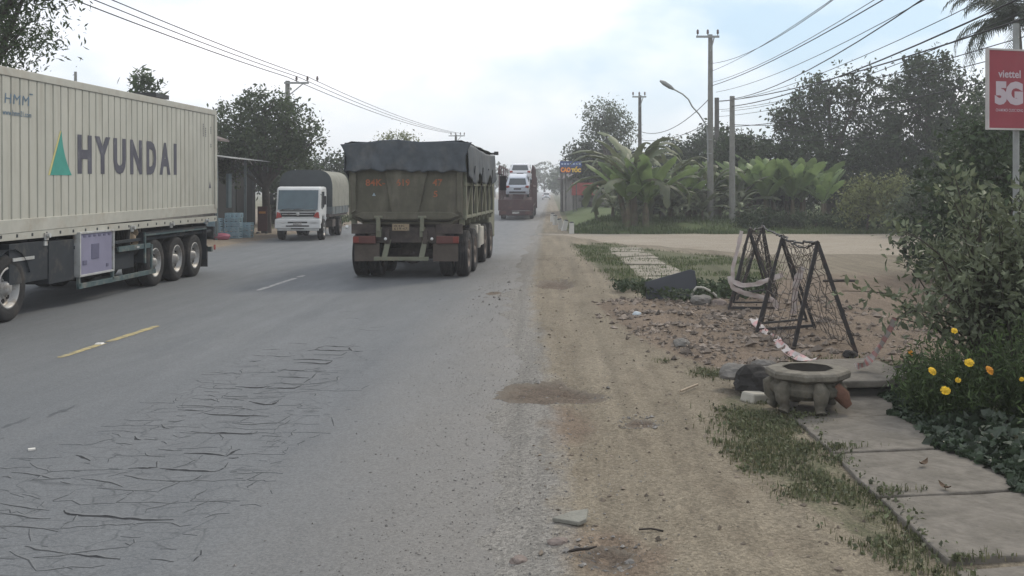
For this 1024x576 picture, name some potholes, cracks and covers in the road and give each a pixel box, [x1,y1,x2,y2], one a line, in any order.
crack [0,318,385,571]
